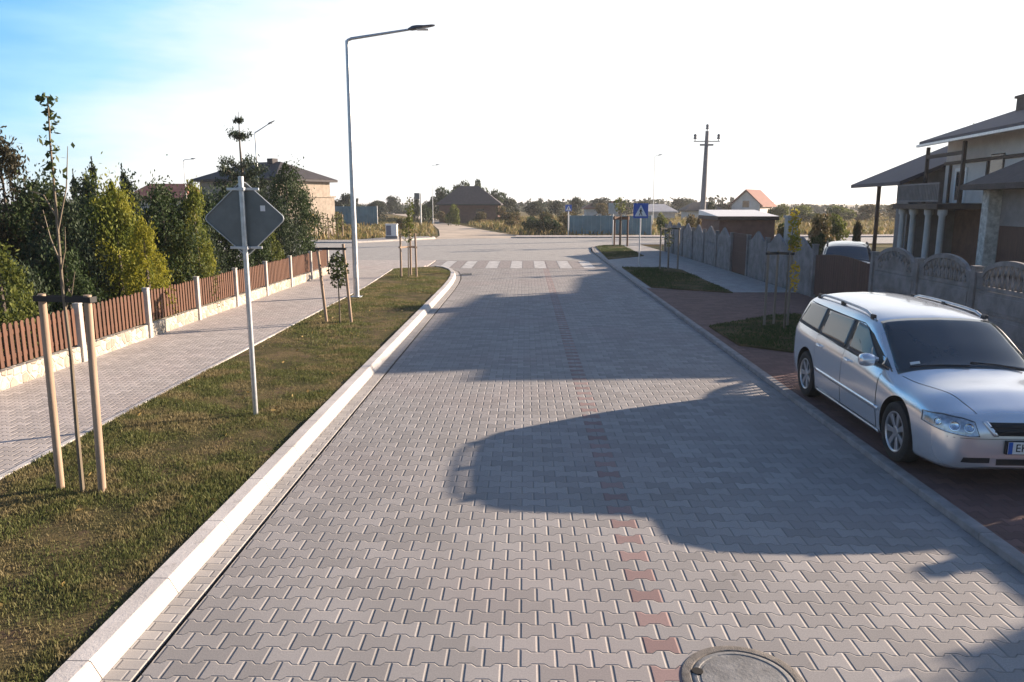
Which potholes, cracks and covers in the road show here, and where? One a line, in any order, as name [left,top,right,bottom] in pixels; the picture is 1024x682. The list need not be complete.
manhole cover [682,646,805,682]
